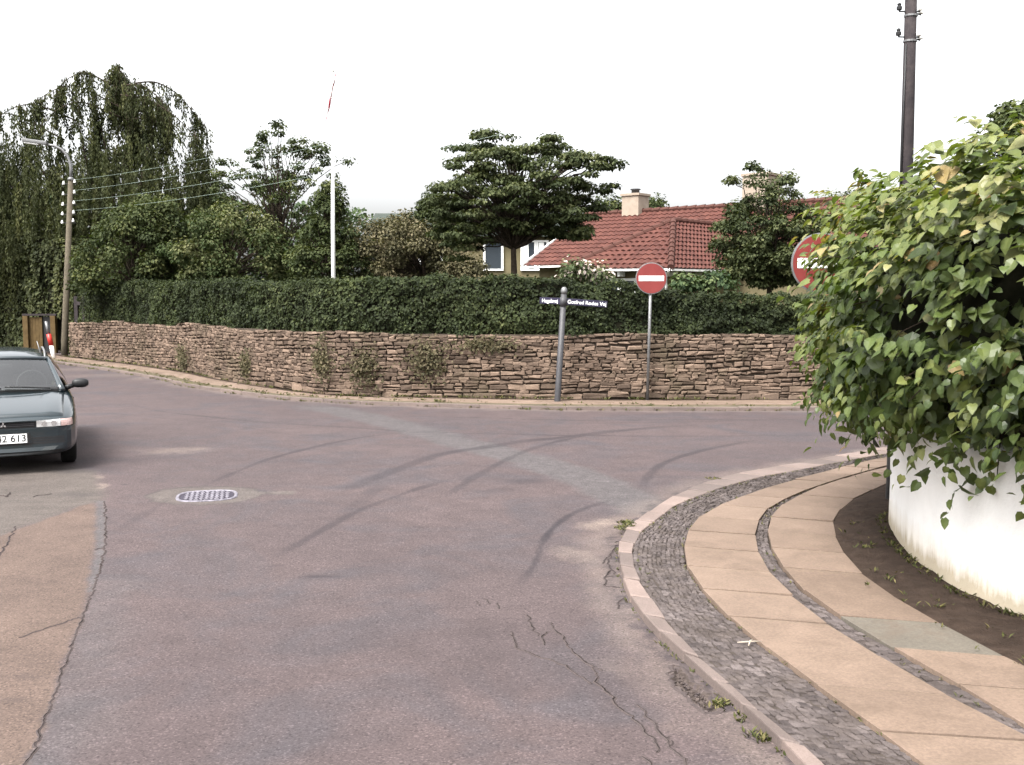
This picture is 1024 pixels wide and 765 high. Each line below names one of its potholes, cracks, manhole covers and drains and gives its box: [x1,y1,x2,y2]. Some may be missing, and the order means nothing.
crack [18,615,85,638]
crack [510,541,688,765]
crack [0,526,17,556]
